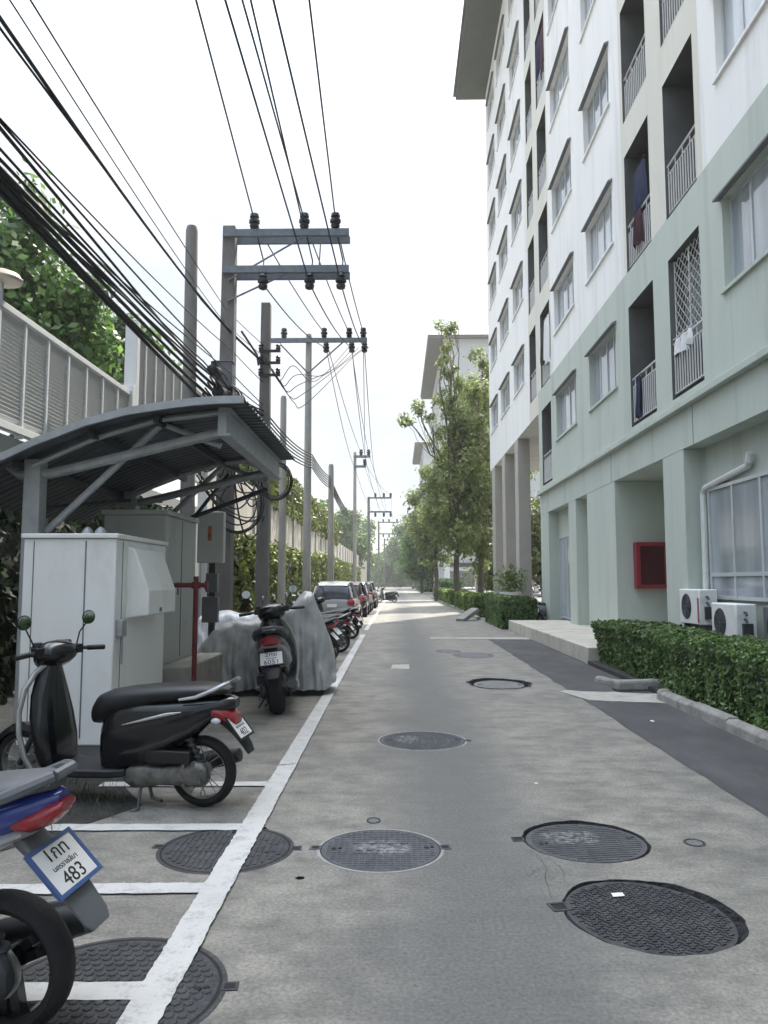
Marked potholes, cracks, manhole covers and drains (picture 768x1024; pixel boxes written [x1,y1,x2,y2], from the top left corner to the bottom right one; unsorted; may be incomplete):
manhole cover [565,882,739,956]
manhole cover [474,681,524,689]
manhole cover [151,829,302,875]
crack [521,846,577,898]
manhole cover [22,937,239,1024]
utility cover [683,838,706,847]
manhole cover [525,824,648,863]
manhole cover [378,731,472,751]
manhole cover [309,829,452,873]
